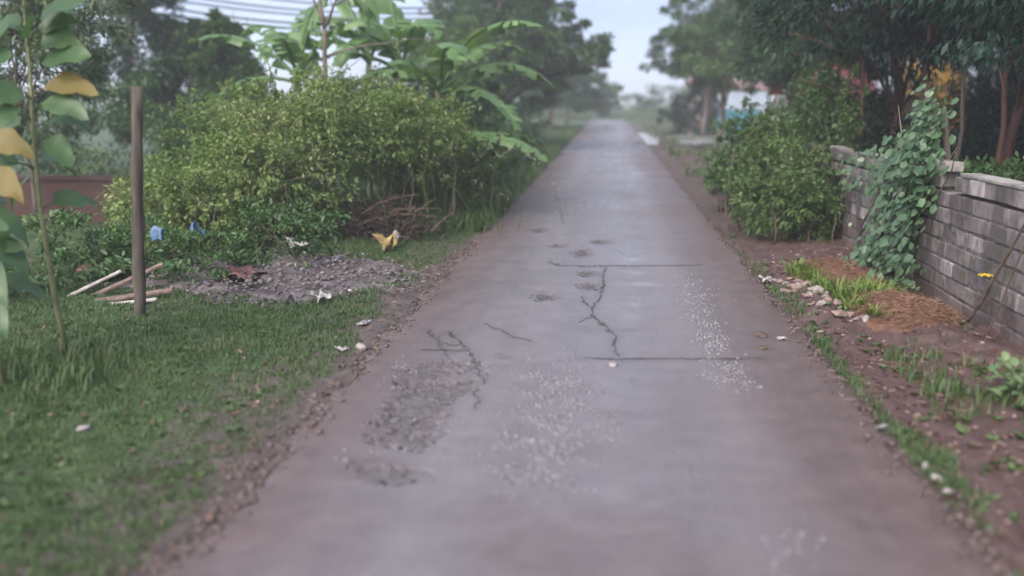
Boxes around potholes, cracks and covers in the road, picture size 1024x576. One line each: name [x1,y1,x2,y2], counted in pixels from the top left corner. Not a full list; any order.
pothole [530,292,560,301]
pothole [359,357,492,453]
crack [421,329,484,408]
pothole [569,249,594,258]
crack [548,261,755,359]
pothole [344,455,436,485]
pothole [576,282,603,291]
